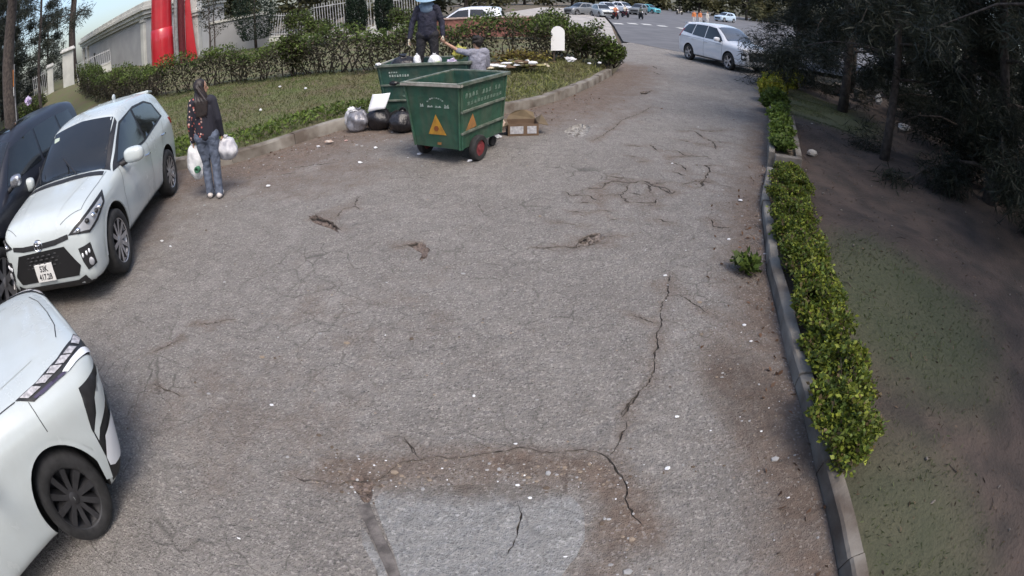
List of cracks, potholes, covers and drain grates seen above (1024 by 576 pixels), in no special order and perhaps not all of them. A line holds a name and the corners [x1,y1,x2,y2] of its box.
pothole [410,242,430,261]
pothole [309,215,338,232]
pothole [578,233,605,246]
crack [533,130,724,249]
crack [501,505,522,562]
crack [291,272,707,529]
